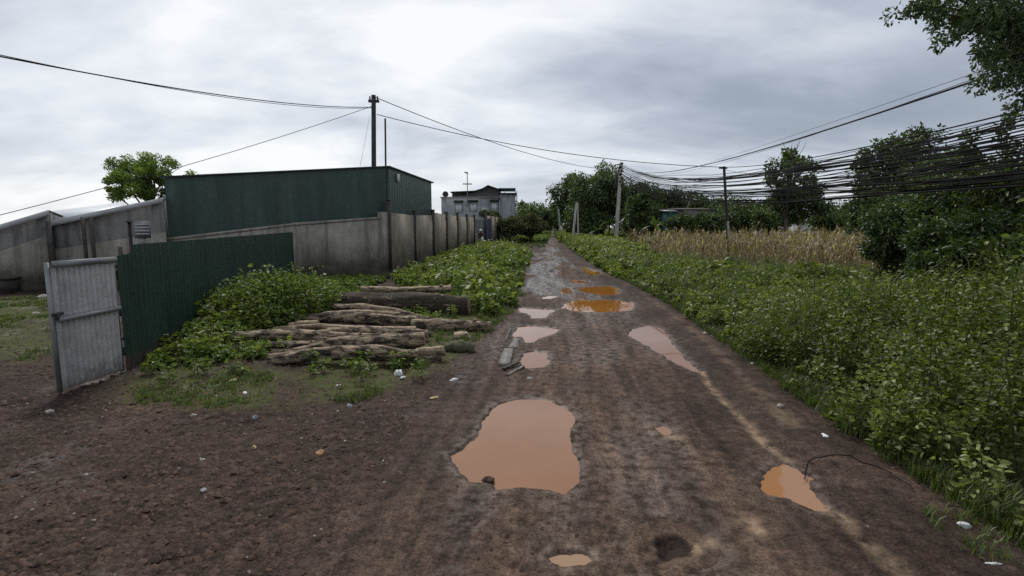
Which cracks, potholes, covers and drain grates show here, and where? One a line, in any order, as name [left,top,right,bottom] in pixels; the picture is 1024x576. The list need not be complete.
pothole [608,321,729,381]
pothole [498,345,572,374]
pothole [729,451,864,527]
pothole [555,283,640,298]
pothole [489,321,579,347]
pothole [424,392,608,509]
pothole [503,303,574,321]
pothole [541,297,656,316]
